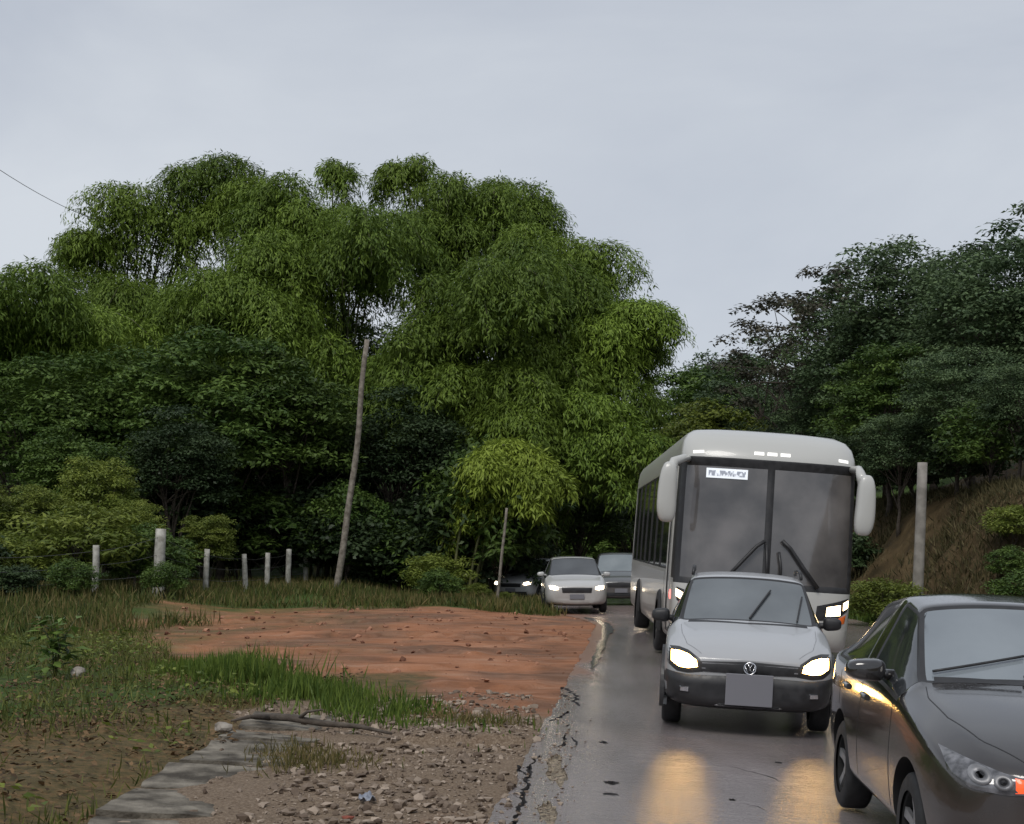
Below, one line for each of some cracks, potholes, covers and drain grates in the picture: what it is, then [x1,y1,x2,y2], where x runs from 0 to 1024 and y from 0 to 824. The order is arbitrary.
crack [512,687,580,824]
